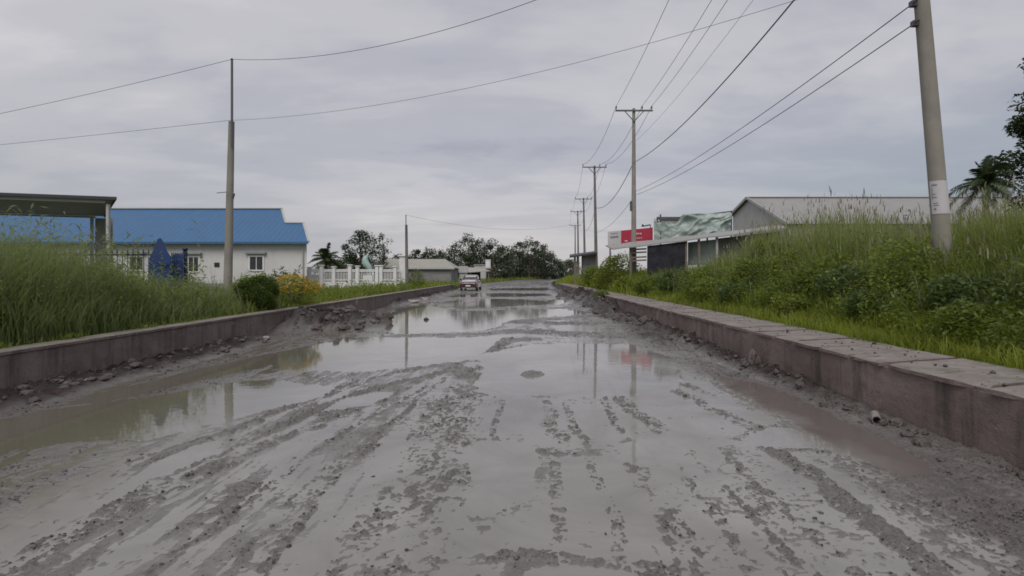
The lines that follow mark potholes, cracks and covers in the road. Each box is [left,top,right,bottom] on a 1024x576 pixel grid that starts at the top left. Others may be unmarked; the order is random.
pothole [437,298,548,309]
pothole [382,304,589,334]
pothole [713,375,945,481]
